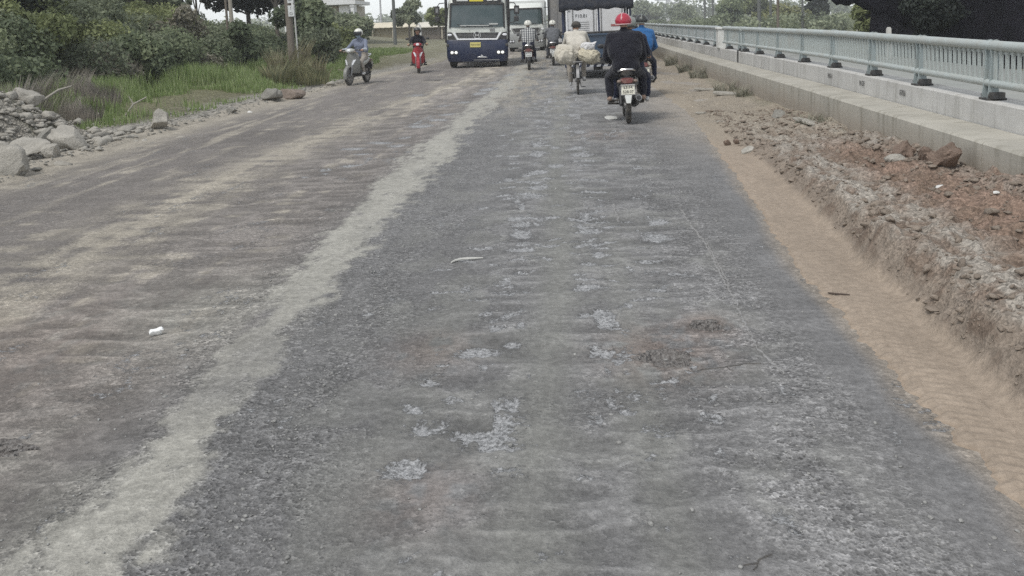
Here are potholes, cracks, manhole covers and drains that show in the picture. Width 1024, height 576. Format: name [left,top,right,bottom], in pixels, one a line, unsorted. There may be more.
crack [681,209,785,373]
pothole [0,438,41,457]
pothole [689,319,725,331]
pothole [632,348,691,368]
